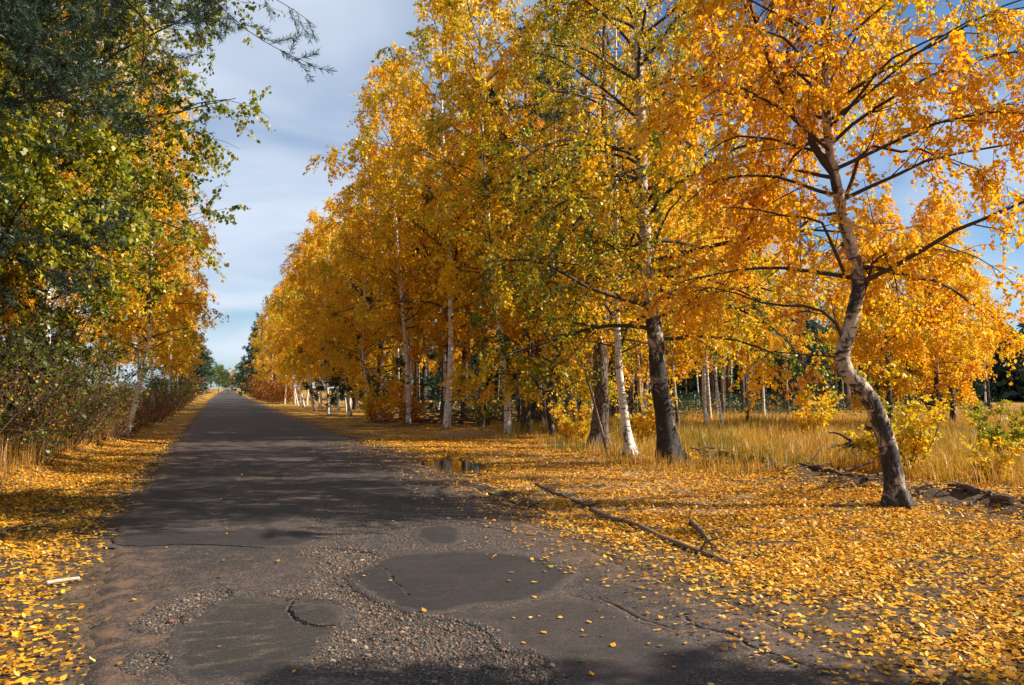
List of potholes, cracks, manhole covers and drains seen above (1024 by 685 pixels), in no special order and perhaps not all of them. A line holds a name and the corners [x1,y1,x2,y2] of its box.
crack [591,598,833,674]
crack [377,566,414,597]
pothole [115,648,176,675]
